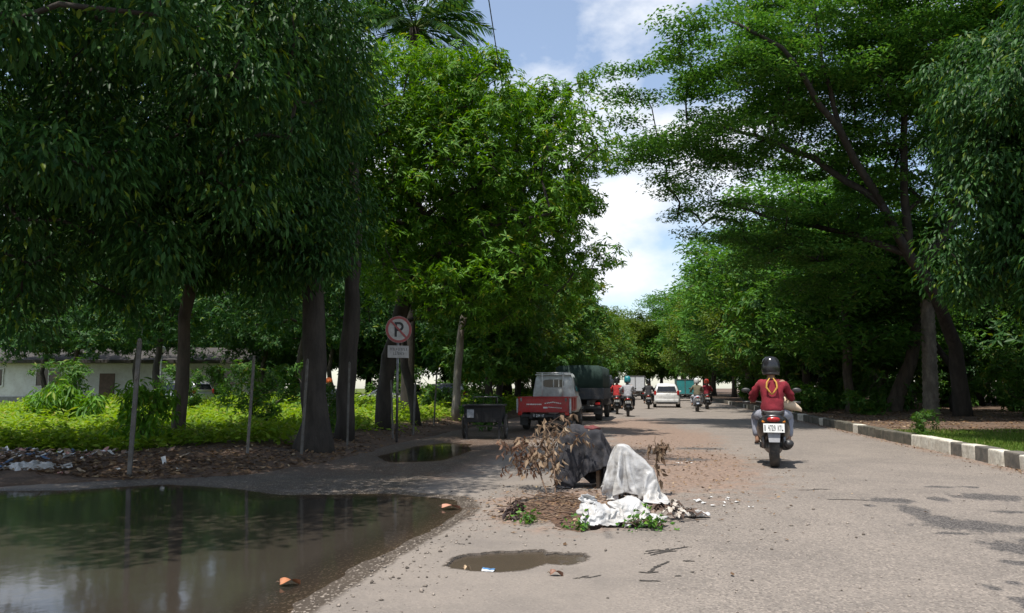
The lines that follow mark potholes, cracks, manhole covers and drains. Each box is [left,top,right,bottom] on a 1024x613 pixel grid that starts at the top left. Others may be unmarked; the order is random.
crack [639,546,695,581]
pothole [445,550,589,572]
